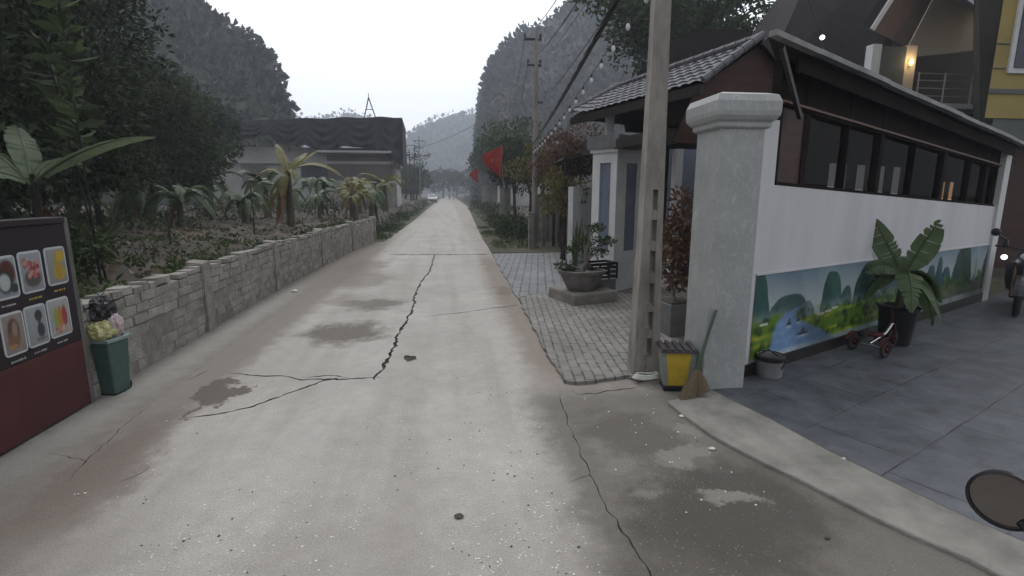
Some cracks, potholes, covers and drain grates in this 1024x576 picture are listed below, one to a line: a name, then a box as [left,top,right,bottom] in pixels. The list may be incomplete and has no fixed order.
crack [55,406,149,480]
crack [185,255,516,418]
